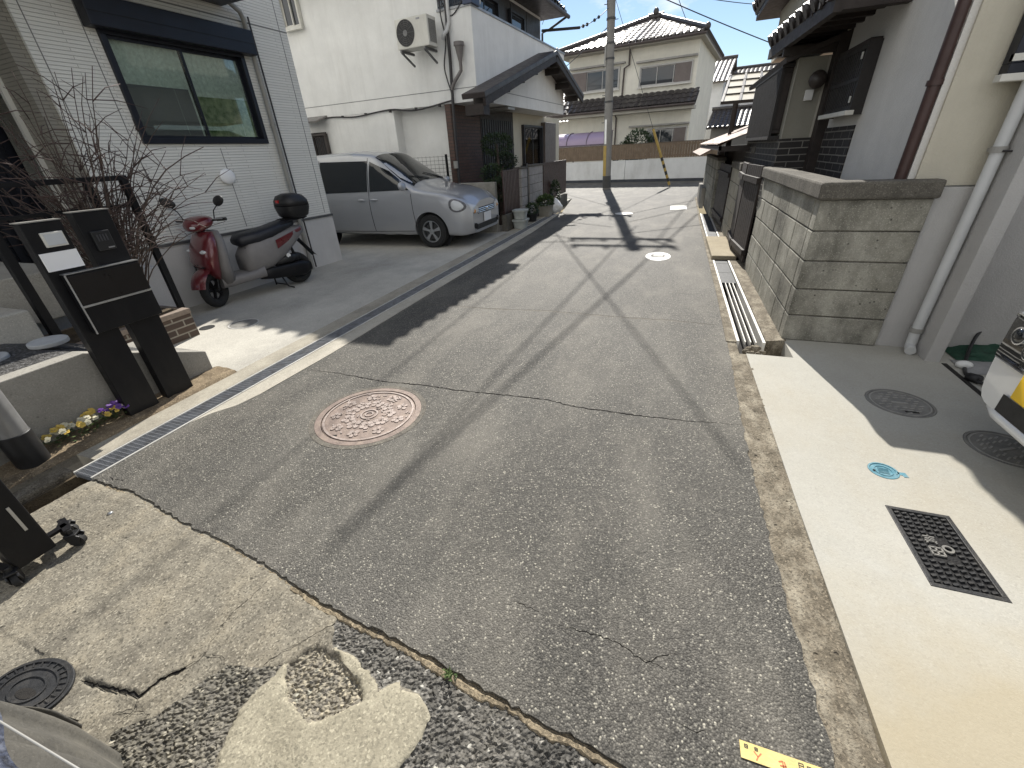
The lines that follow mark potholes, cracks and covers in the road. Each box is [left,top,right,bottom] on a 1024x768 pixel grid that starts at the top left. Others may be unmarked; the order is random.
crack [320,371,692,422]
manhole cover [646,252,671,261]
manhole cover [865,389,937,418]
manhole cover [0,658,76,710]
manhole cover [963,430,1024,469]
utility cover [867,462,909,479]
manhole cover [308,386,426,449]
crack [84,582,267,723]
